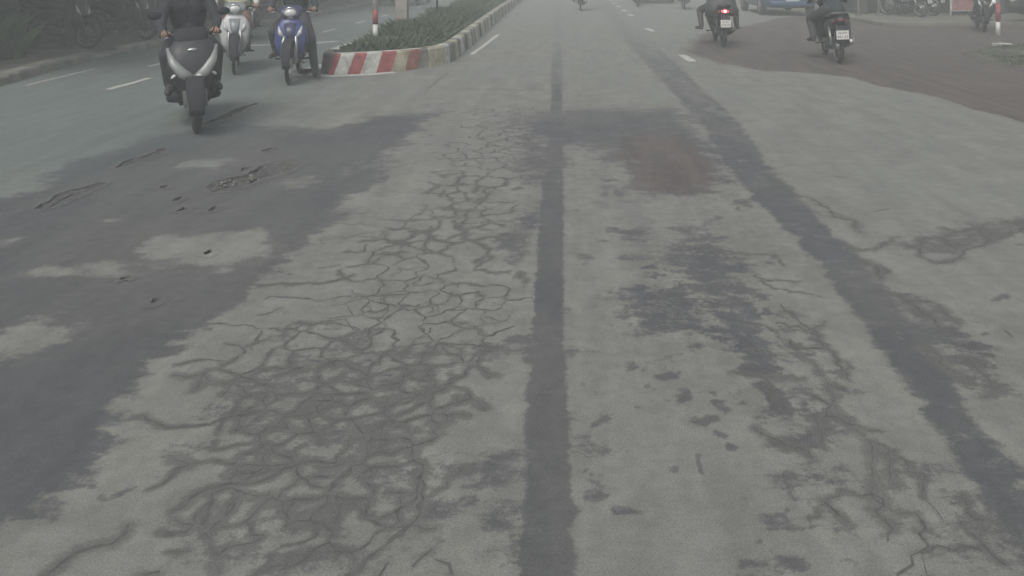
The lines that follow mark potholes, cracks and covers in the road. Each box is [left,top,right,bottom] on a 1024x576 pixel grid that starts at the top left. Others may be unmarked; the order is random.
crack [788,192,1024,397]
pothole [199,204,225,214]
pothole [198,158,311,194]
pothole [152,183,176,191]
pothole [164,195,190,203]
crack [48,106,548,576]
crack [710,250,1006,576]
pothole [167,204,197,214]
